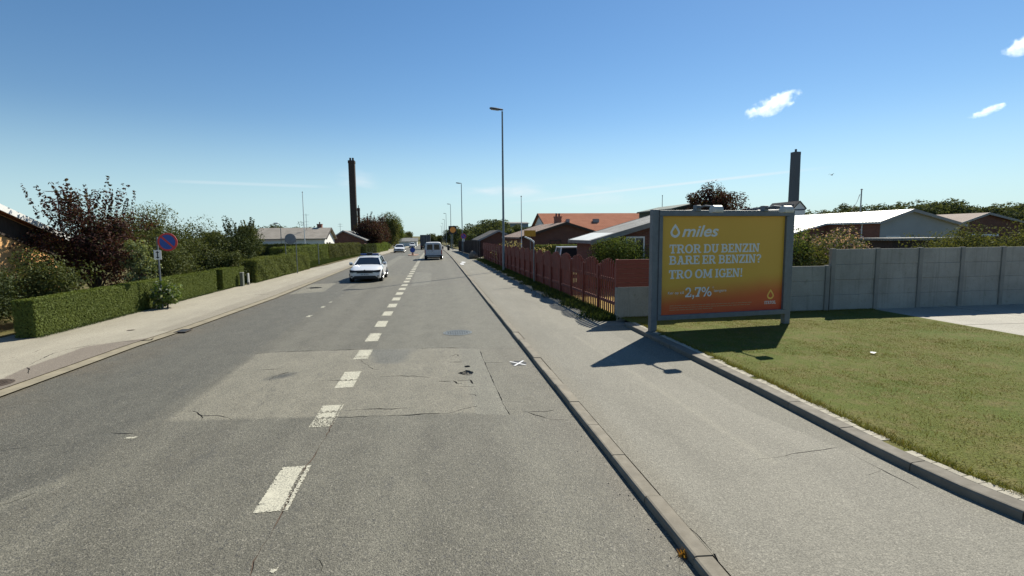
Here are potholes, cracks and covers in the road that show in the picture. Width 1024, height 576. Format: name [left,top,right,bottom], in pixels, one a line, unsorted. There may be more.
crack [250,349,510,576]
